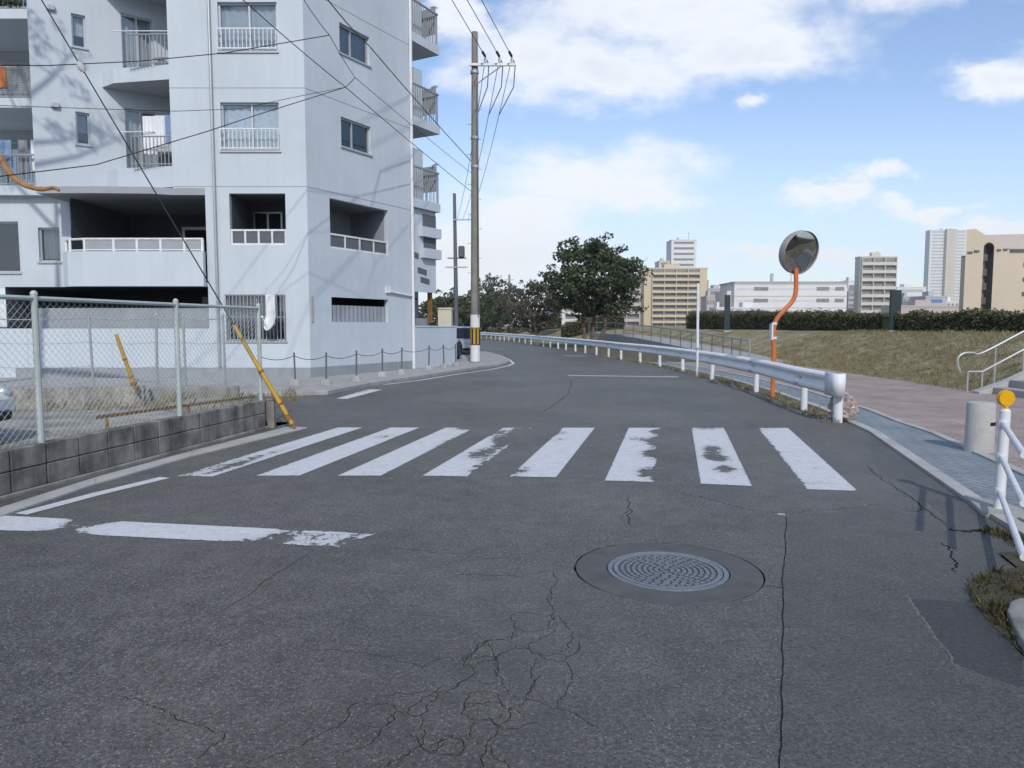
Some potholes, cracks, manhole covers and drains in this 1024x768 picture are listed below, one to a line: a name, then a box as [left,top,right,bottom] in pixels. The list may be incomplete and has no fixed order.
crack [111,695,226,759]
crack [867,466,992,573]
manhole cover [574,543,766,605]
crack [263,589,600,768]
